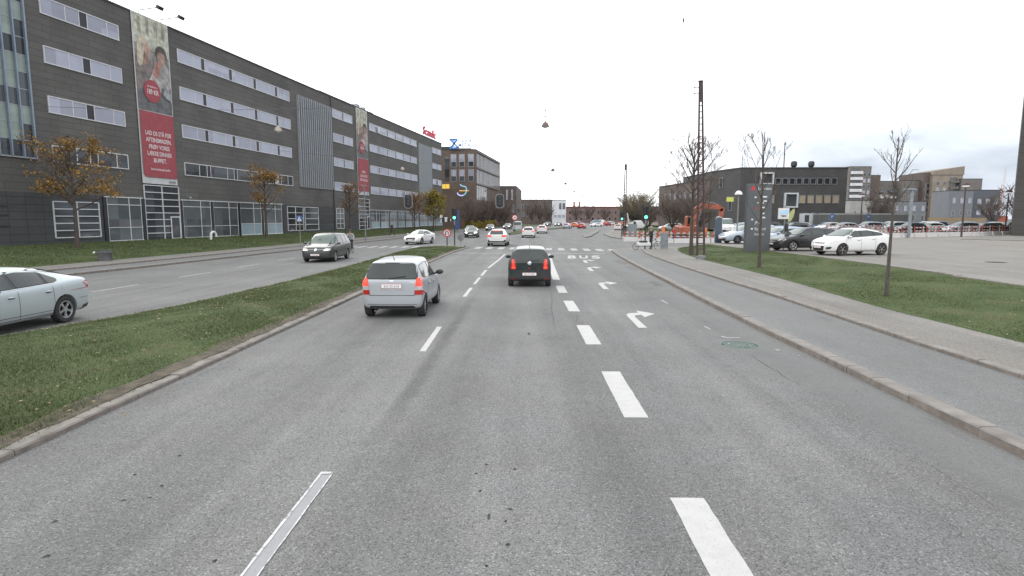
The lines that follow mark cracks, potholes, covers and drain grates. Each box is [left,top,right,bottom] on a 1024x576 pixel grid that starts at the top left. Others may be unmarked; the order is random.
manhole cover [719,341,761,349]
